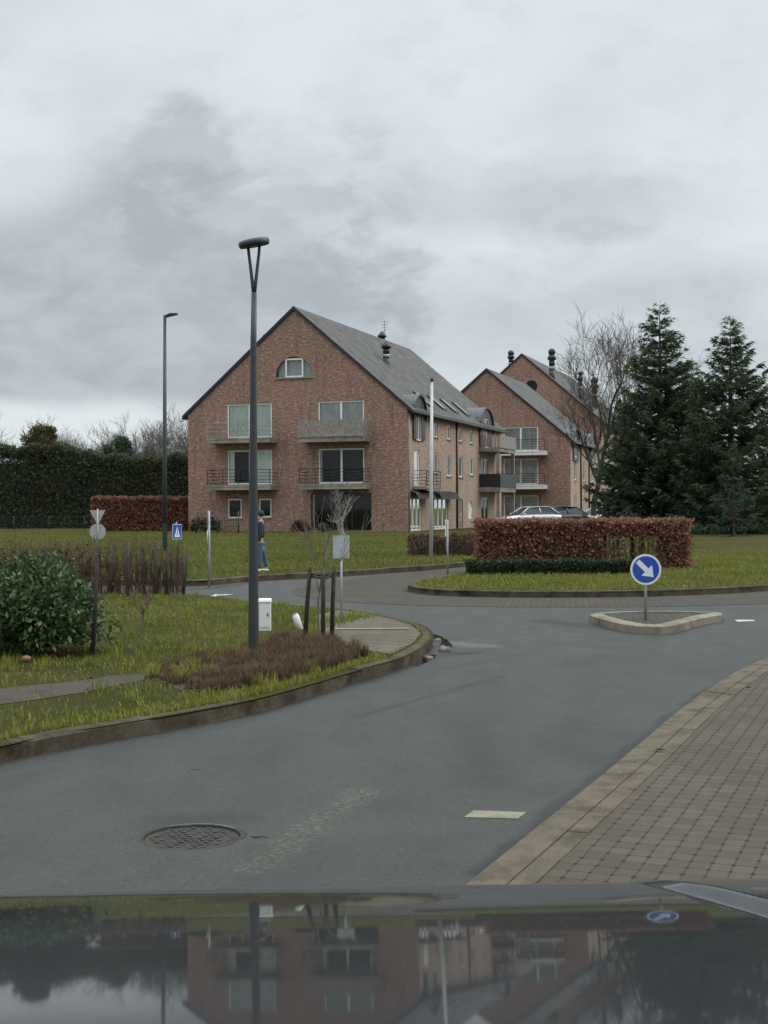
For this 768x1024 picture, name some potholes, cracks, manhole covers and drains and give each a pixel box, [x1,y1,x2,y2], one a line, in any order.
manhole cover [137,823,248,851]
